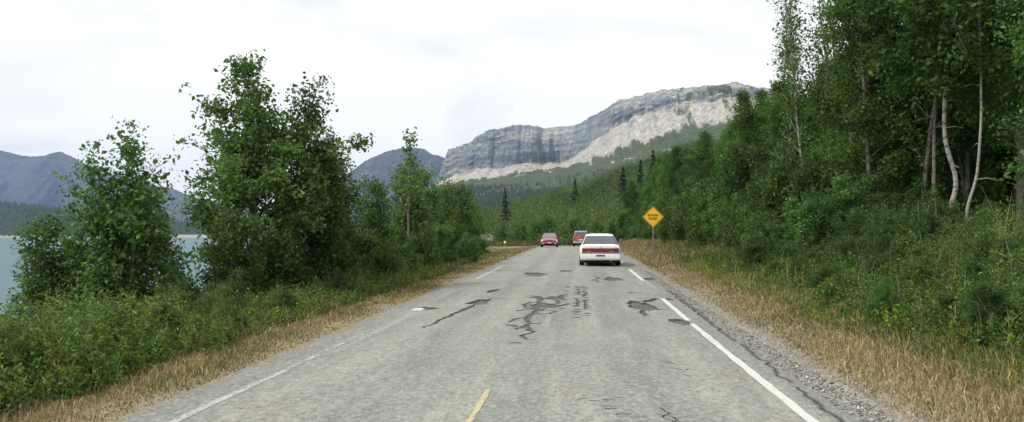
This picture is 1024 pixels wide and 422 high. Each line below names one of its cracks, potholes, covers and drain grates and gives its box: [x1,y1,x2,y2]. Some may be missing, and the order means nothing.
pothole [627,298,663,316]
crack [660,408,680,422]
crack [424,305,475,327]
crack [508,276,599,343]
